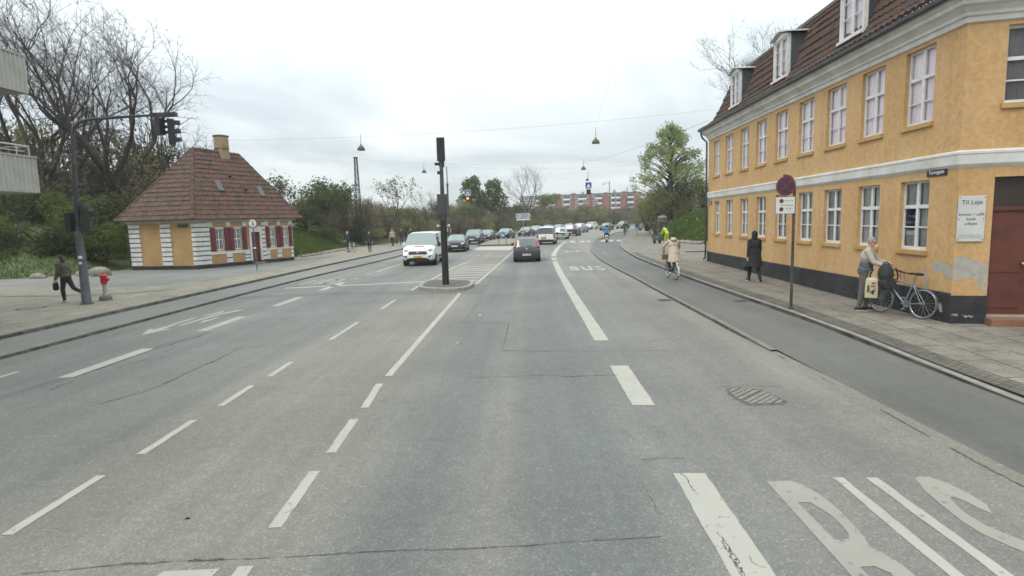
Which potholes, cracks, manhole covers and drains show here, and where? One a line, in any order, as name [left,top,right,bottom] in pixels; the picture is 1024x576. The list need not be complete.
crack [99,345,281,404]
